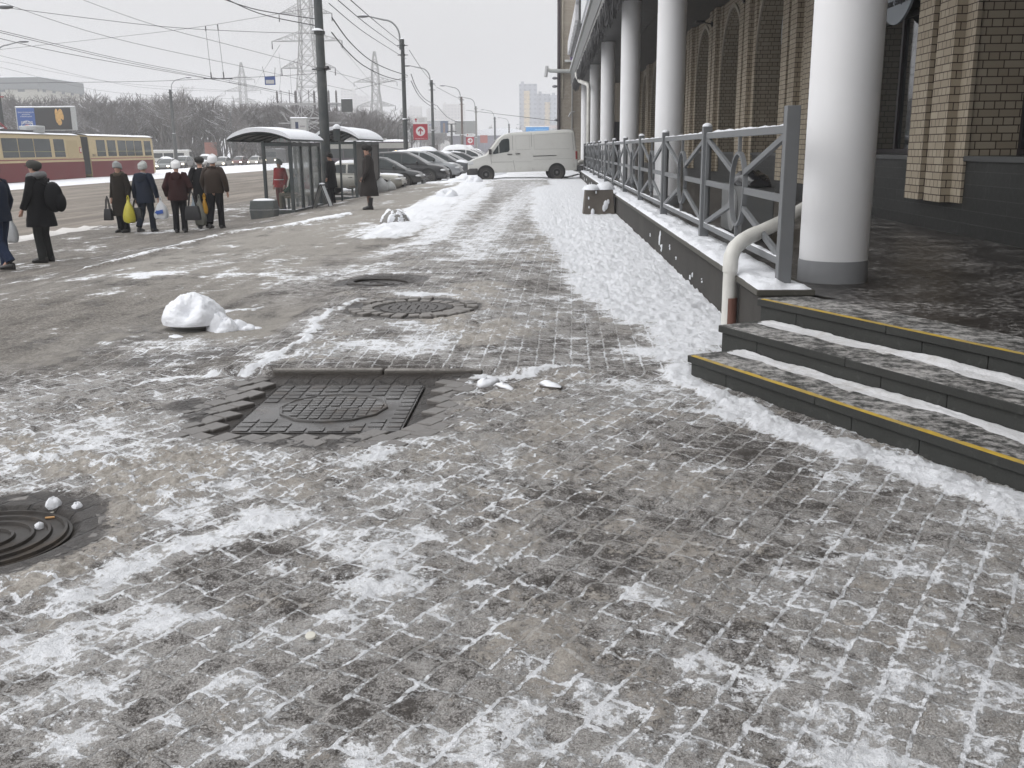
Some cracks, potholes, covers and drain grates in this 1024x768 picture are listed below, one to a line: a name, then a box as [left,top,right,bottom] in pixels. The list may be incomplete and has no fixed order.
manhole cover [348,296,478,319]
manhole cover [153,376,483,450]
manhole cover [347,278,414,286]
manhole cover [0,496,106,571]
